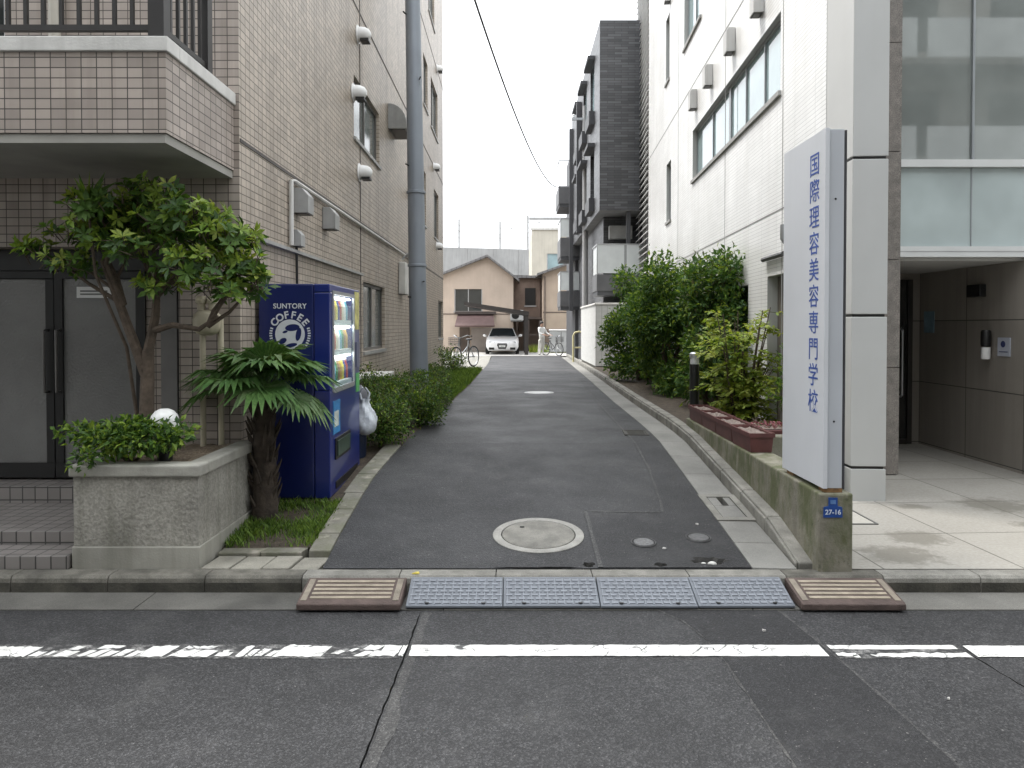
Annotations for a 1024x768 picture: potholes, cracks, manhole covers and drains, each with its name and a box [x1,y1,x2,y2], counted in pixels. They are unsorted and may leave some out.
manhole cover [685,532,712,543]
manhole cover [493,518,584,553]
manhole cover [631,537,657,548]
